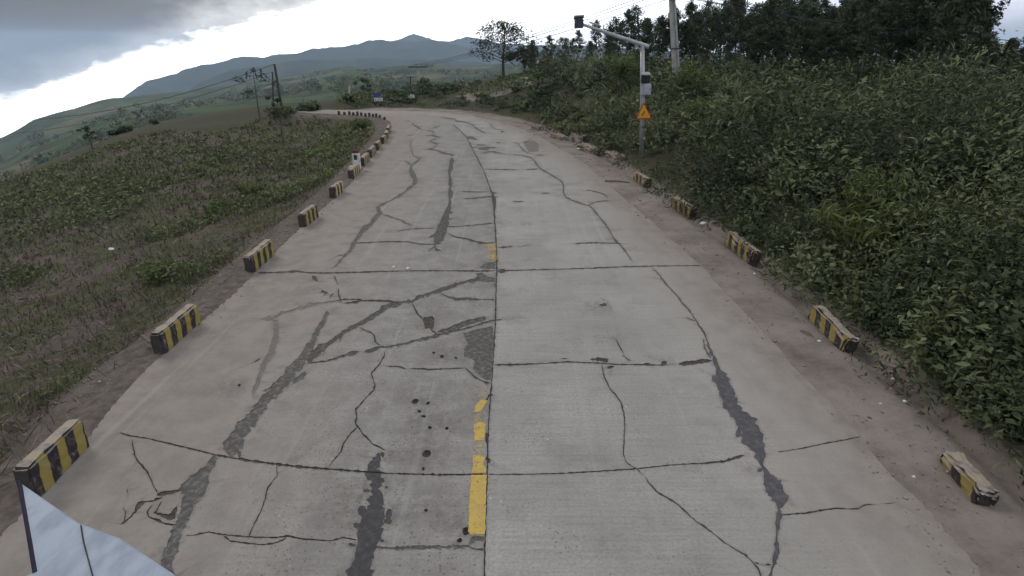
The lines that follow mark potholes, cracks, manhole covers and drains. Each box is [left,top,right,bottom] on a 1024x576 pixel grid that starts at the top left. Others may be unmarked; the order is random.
crack [121,127,891,576]
